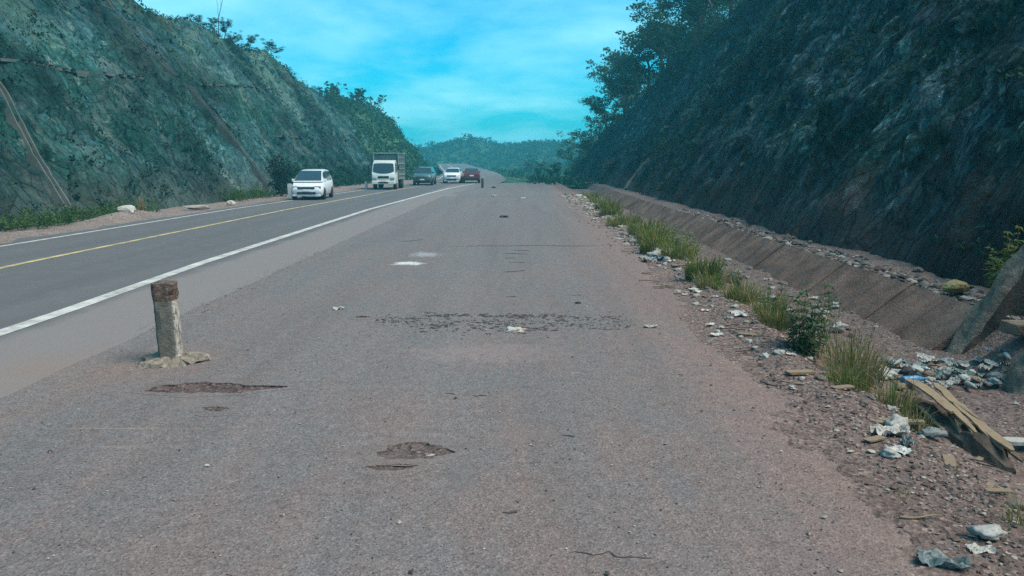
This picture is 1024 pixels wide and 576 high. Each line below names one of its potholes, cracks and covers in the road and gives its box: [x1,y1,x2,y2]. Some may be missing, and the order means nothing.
pothole [361,437,471,466]
pothole [131,379,300,398]
